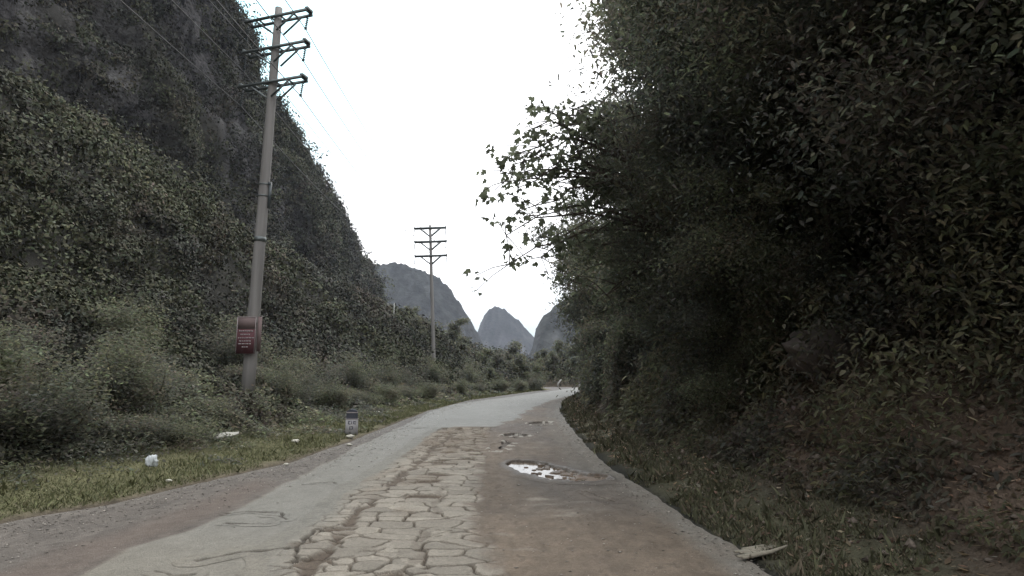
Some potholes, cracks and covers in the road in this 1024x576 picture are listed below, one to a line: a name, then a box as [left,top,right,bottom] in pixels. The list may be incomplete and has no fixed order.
pothole [489,457,633,486]
crack [141,427,539,576]
